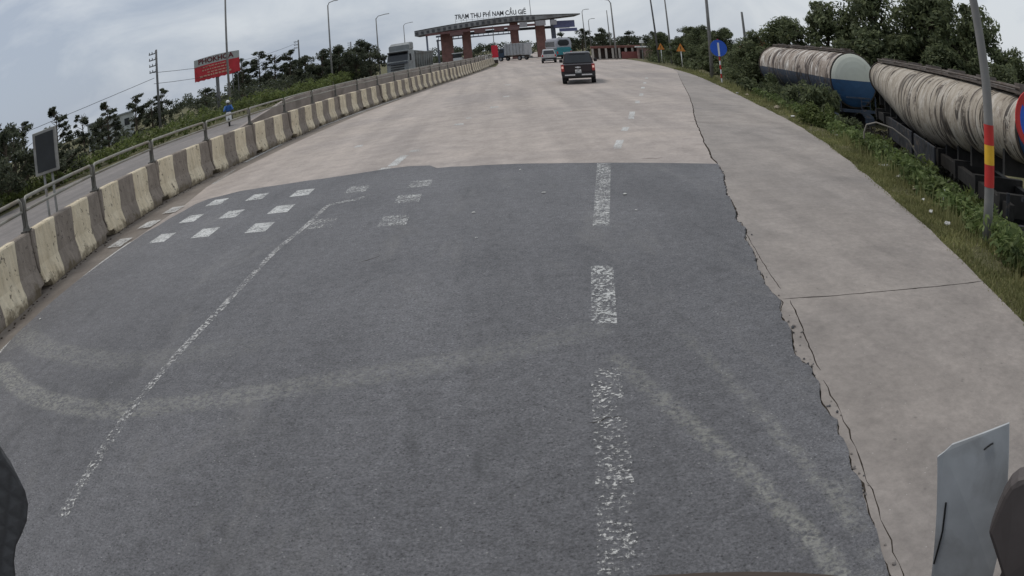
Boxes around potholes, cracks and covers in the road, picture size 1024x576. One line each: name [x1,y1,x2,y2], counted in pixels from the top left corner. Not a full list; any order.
crack [678,74,904,576]
